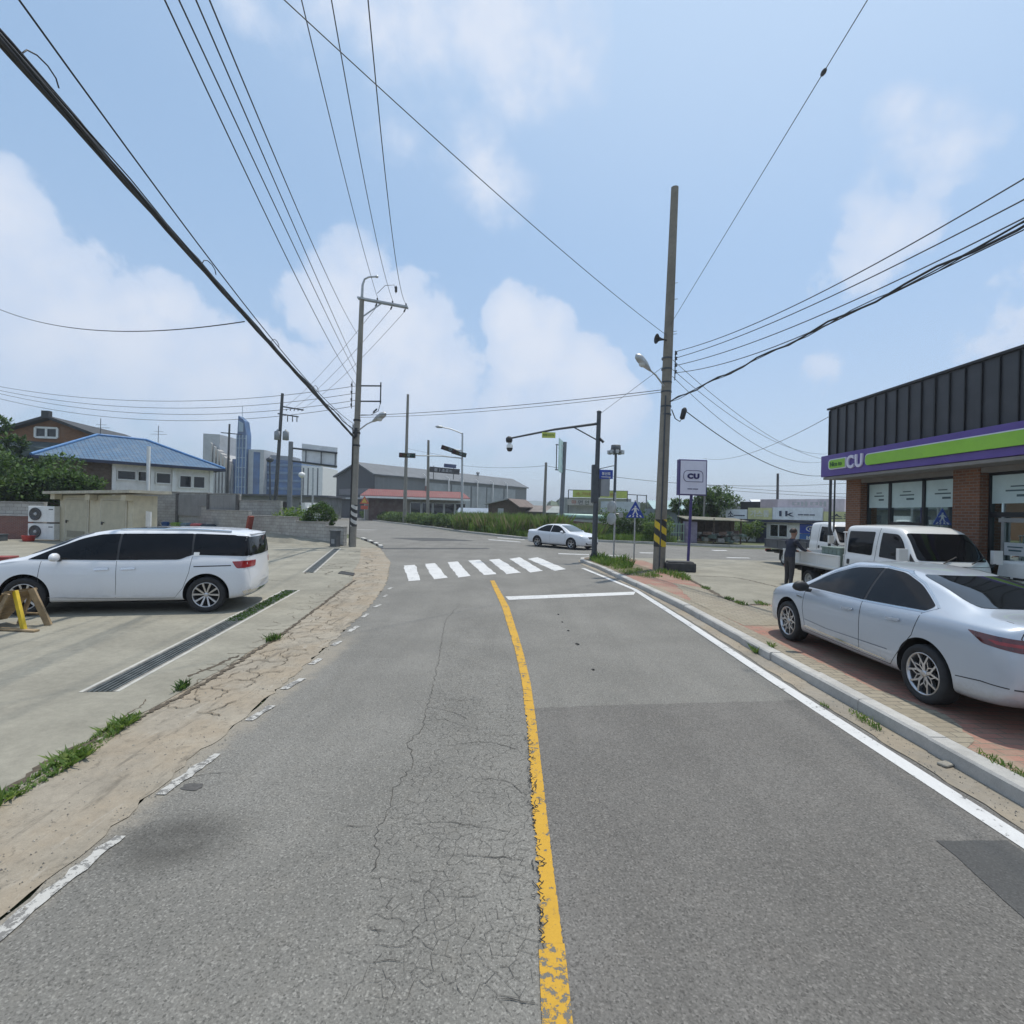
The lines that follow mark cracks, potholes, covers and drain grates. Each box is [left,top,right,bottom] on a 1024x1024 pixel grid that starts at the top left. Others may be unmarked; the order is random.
drain grate [302,548,341,573]
drain grate [79,590,300,692]
crack [5,549,379,791]
crack [333,605,548,1016]
